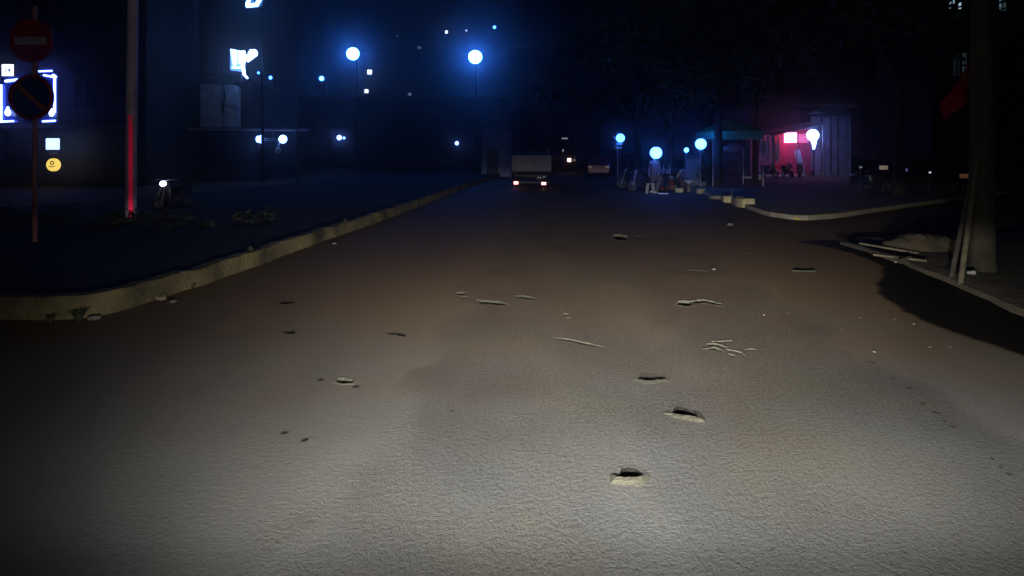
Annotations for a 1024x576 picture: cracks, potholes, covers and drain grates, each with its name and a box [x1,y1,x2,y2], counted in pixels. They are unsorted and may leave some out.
pothole [633,374,670,384]
pothole [333,376,357,385]
crack [455,292,537,305]
pothole [610,464,651,486]
pothole [665,404,705,422]
crack [703,340,756,357]
crack [552,337,606,348]
